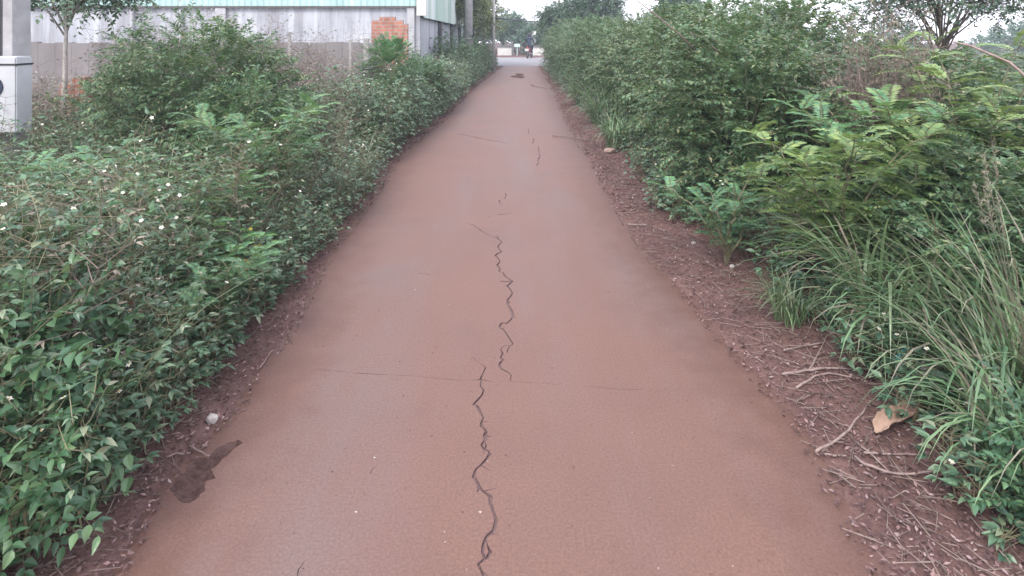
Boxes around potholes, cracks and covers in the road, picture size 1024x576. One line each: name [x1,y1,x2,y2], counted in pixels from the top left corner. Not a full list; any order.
pothole [170,440,243,503]
crack [318,193,754,576]
